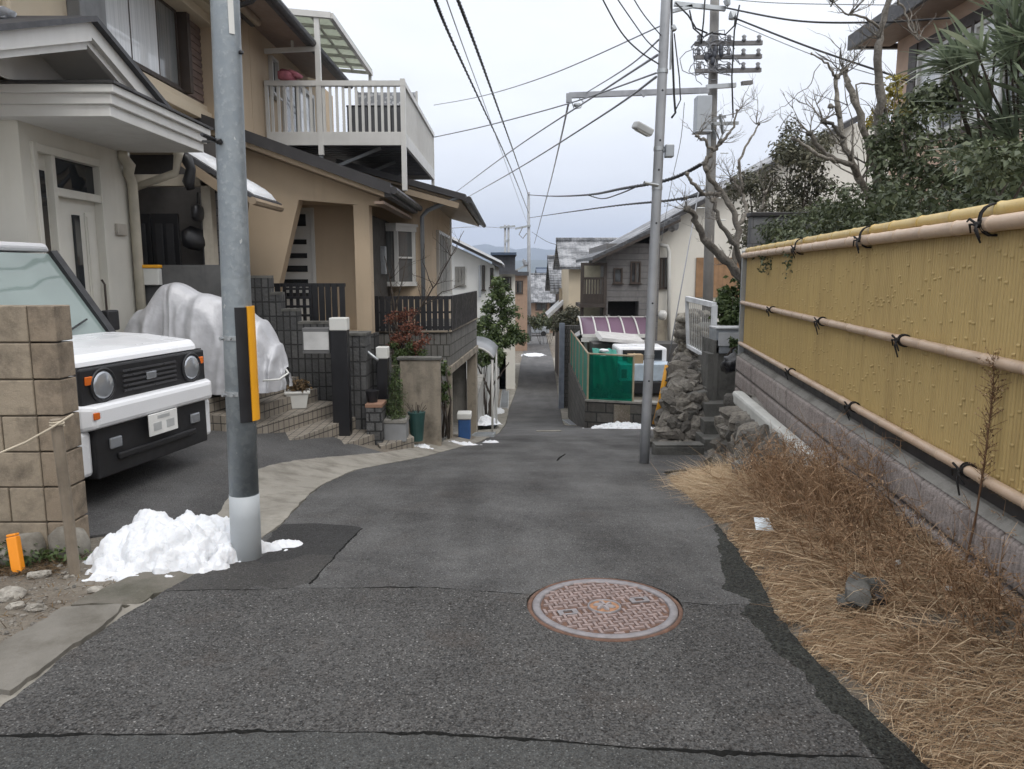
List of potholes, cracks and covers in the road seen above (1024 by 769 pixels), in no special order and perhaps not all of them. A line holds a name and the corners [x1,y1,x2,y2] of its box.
manhole cover [527,578,683,642]
